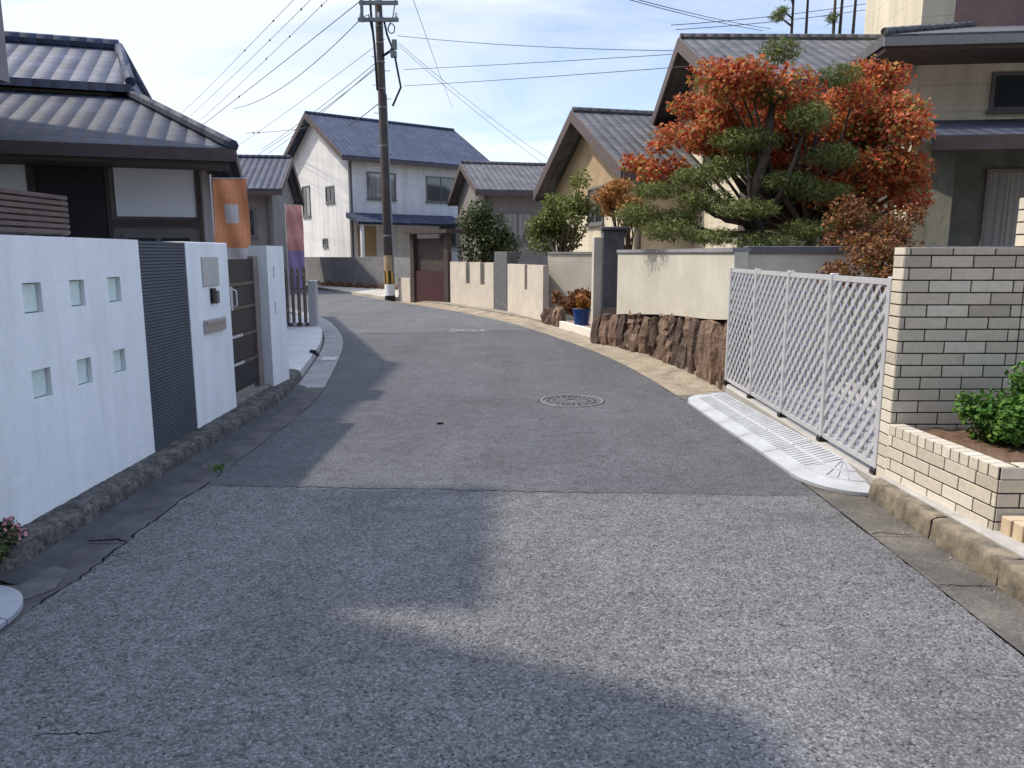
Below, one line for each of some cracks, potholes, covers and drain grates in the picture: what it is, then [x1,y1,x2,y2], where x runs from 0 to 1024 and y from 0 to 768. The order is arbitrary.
crack [30,490,197,610]
manhole cover [540,394,604,407]
